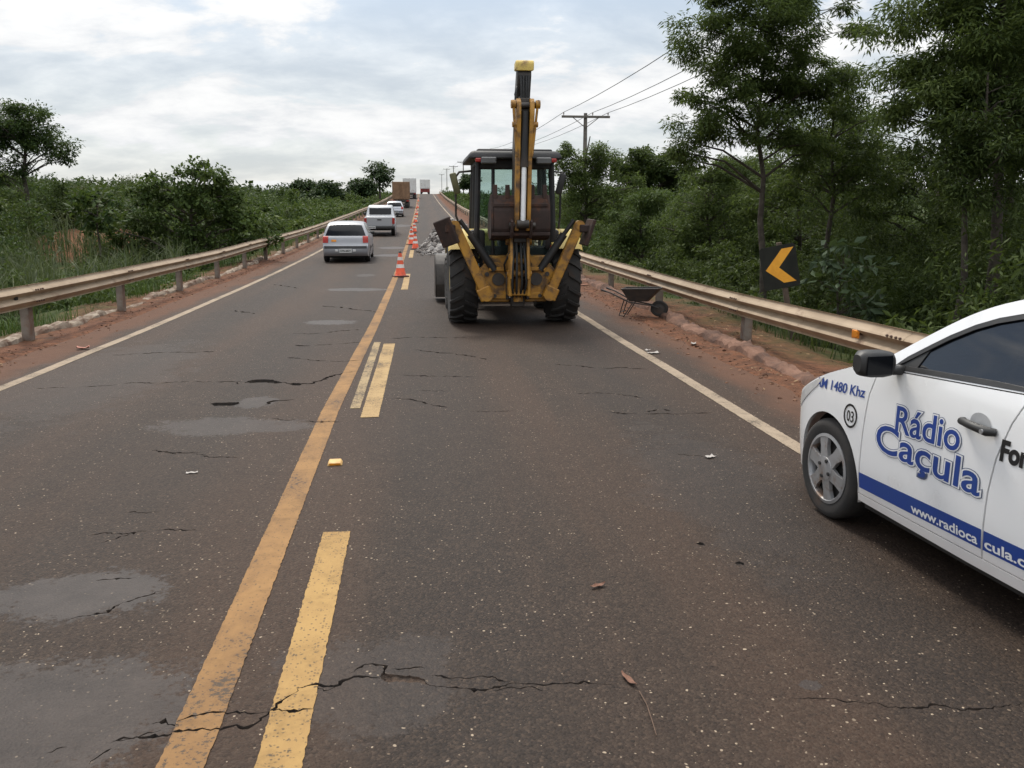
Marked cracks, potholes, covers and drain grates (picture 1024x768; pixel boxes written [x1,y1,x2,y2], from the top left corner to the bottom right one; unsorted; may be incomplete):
crack [49,663,611,764]
crack [577,393,700,414]
crack [785,697,1021,711]
crack [68,577,158,620]
crack [156,450,237,458]
crack [265,329,359,423]
crack [395,337,486,360]
crack [90,511,195,543]
crack [397,375,460,408]
